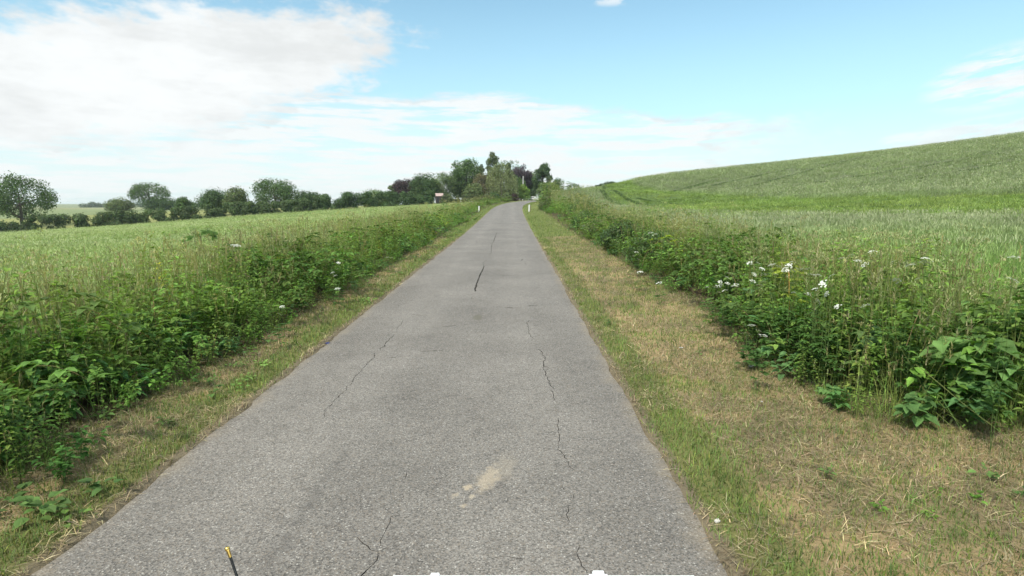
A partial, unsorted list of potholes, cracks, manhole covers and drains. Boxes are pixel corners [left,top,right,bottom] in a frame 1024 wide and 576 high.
crack [527,324,571,468]
crack [324,314,443,418]
crack [357,473,407,576]
